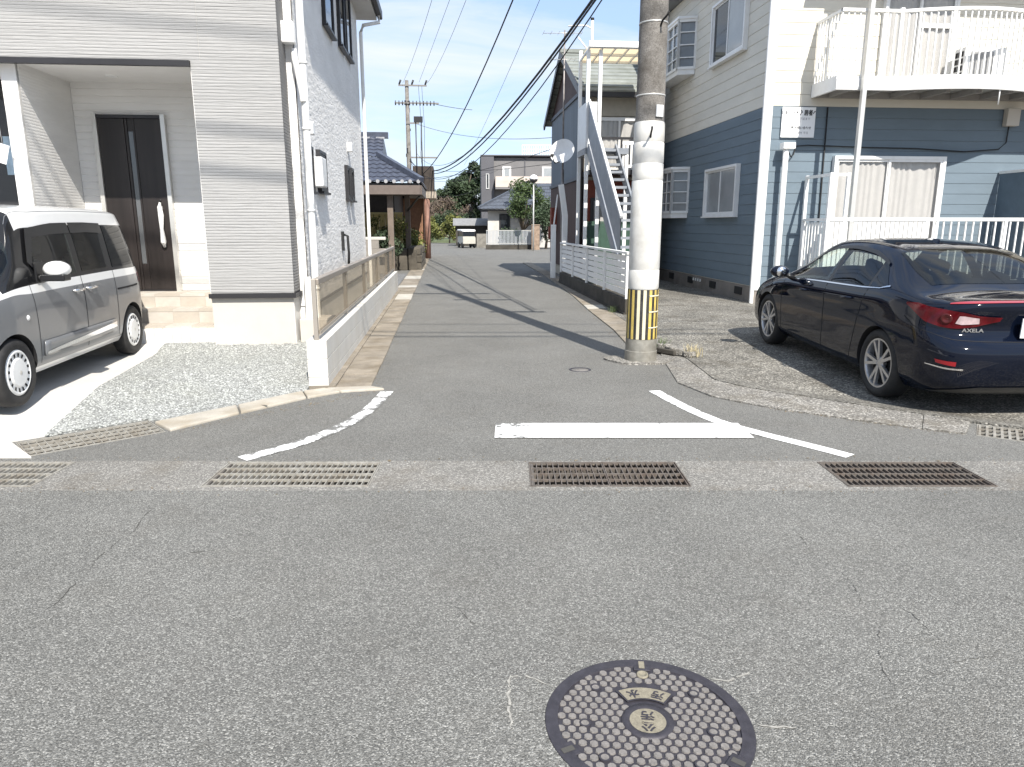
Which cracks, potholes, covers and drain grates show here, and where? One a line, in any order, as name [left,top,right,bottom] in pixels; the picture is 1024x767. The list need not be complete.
crack [800,536,1022,688]
manhole cover [545,660,756,767]
drain grate [16,420,166,456]
drain grate [817,462,998,487]
drain grate [0,462,75,487]
drain grate [976,424,1024,442]
crack [506,672,795,735]
crack [48,497,169,608]
drain grate [201,462,382,487]
drain grate [528,462,692,487]
